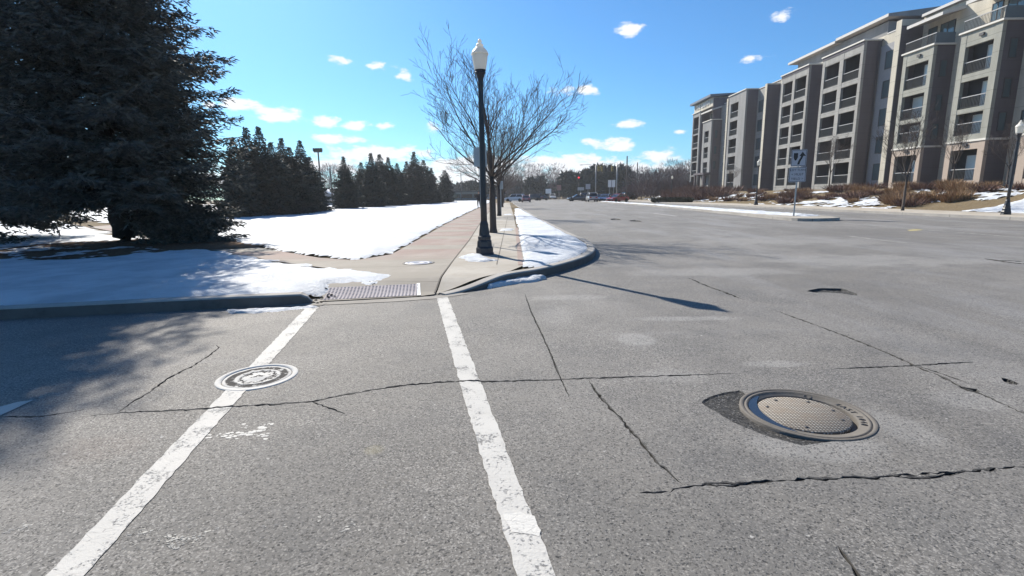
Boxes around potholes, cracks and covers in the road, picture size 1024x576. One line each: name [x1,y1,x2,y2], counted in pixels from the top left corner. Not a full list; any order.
manhole cover [214,364,298,391]
crack [6,345,1024,494]
pothole [808,288,858,296]
manhole cover [739,389,879,442]
crack [838,546,861,576]
